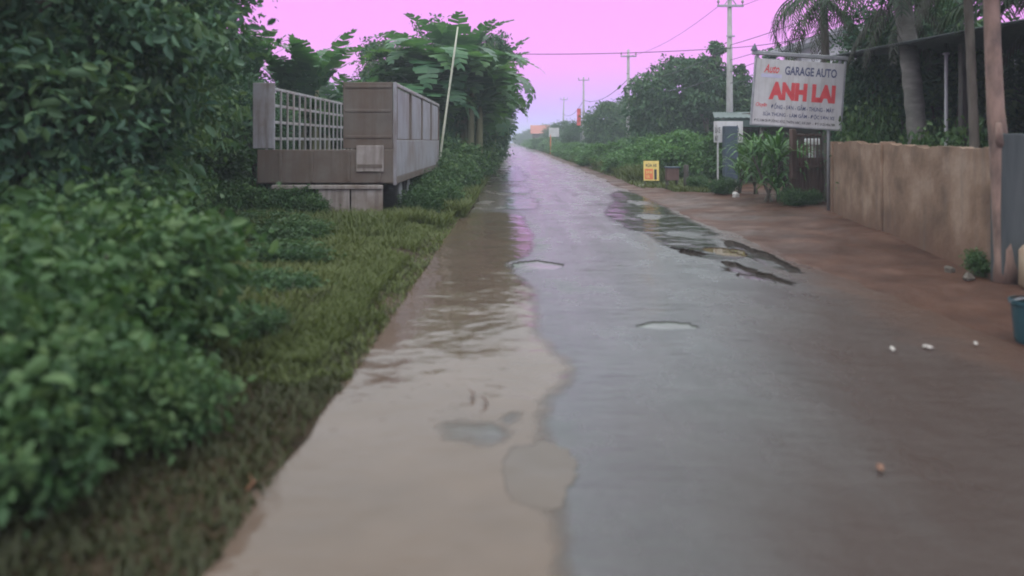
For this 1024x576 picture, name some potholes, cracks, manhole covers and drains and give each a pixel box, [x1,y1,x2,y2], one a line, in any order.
pothole [635,321,701,329]
pothole [702,247,748,257]
pothole [668,246,710,258]
pothole [510,260,565,270]
pothole [719,261,797,287]
pothole [719,239,803,273]
